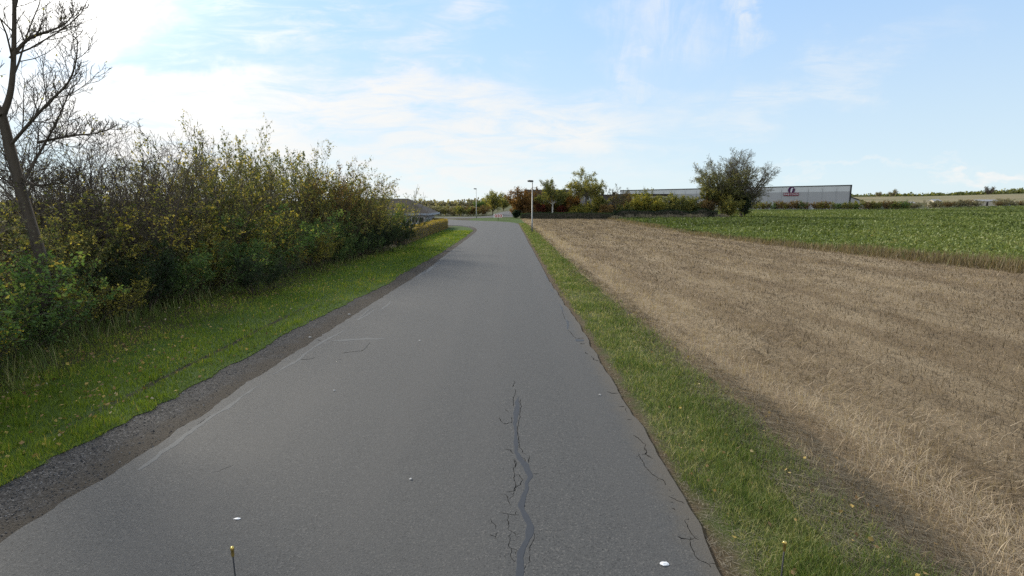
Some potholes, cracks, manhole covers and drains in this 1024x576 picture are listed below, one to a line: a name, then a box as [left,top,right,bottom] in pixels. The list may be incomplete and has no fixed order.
crack [610,392,715,567]
crack [490,381,535,572]
